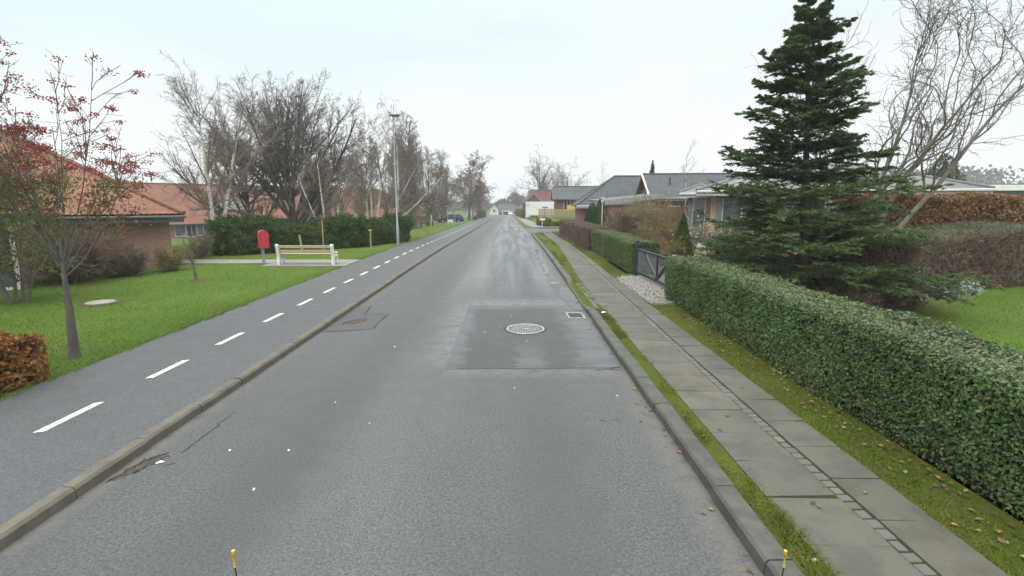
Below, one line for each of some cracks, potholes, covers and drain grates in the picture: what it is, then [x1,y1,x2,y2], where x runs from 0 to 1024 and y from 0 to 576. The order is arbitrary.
pothole [105,452,169,483]
manhole cover [505,324,546,334]
